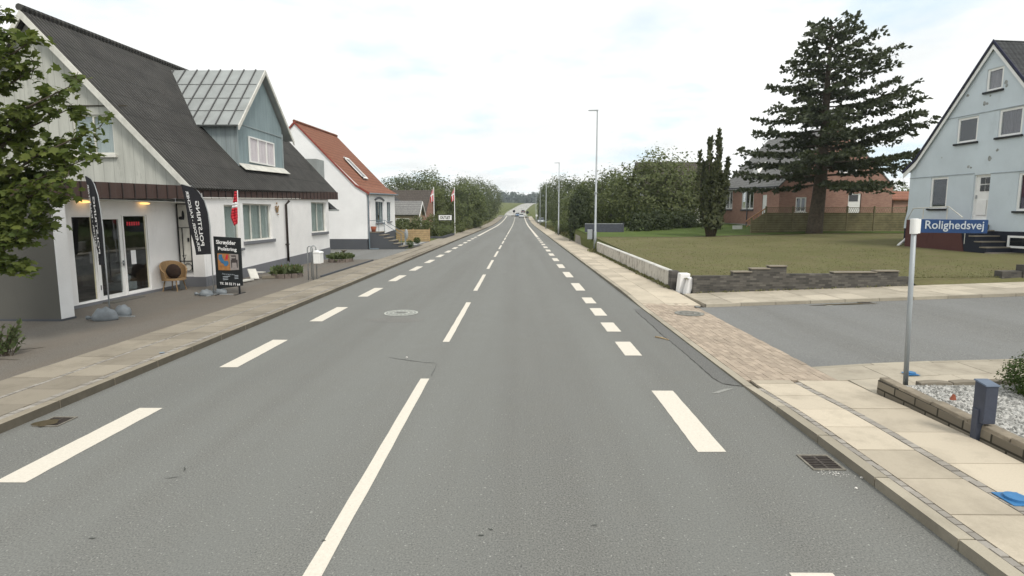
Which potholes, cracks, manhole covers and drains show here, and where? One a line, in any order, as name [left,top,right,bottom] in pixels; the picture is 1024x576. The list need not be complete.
drain grate [31,416,78,427]
drain grate [796,454,846,470]
